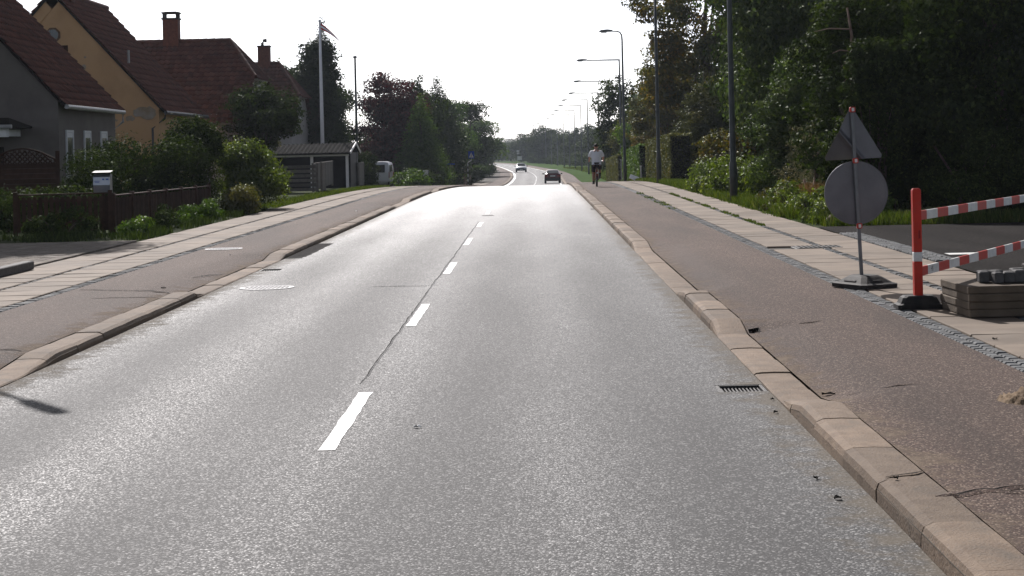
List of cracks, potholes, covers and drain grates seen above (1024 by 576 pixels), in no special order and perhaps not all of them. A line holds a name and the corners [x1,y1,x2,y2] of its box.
crack [886,471,1024,497]
crack [360,221,479,384]
